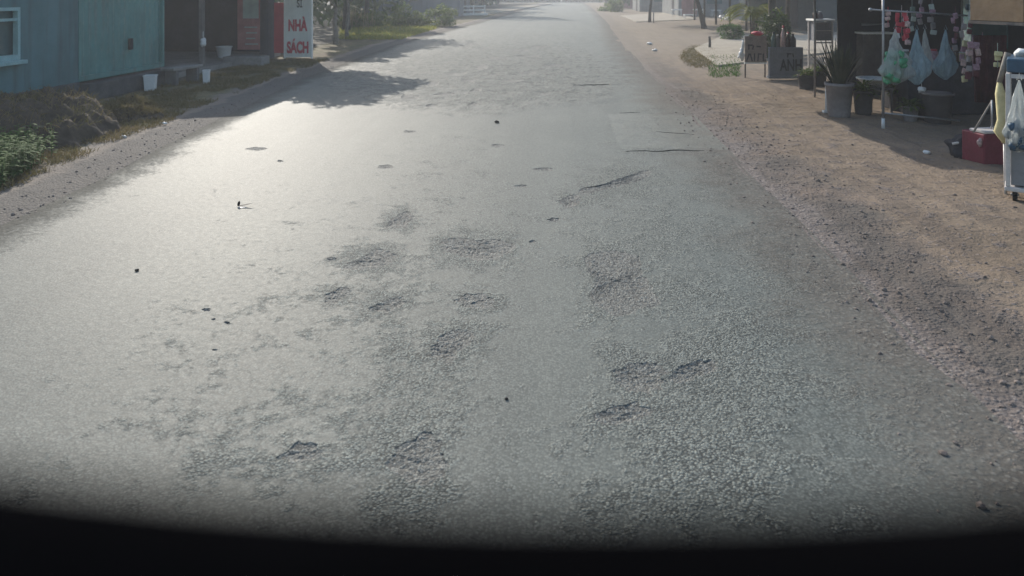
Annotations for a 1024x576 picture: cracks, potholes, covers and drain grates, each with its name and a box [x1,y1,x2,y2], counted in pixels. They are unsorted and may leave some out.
crack [626,131,701,152]
pothole [369,296,407,314]
pothole [613,362,670,394]
pothole [276,441,322,464]
pothole [584,250,662,316]
pothole [454,293,495,309]
pothole [343,249,398,270]
pothole [593,401,654,425]
pothole [324,287,352,305]
pothole [429,329,476,365]
pothole [668,358,719,384]
pothole [439,238,517,261]
